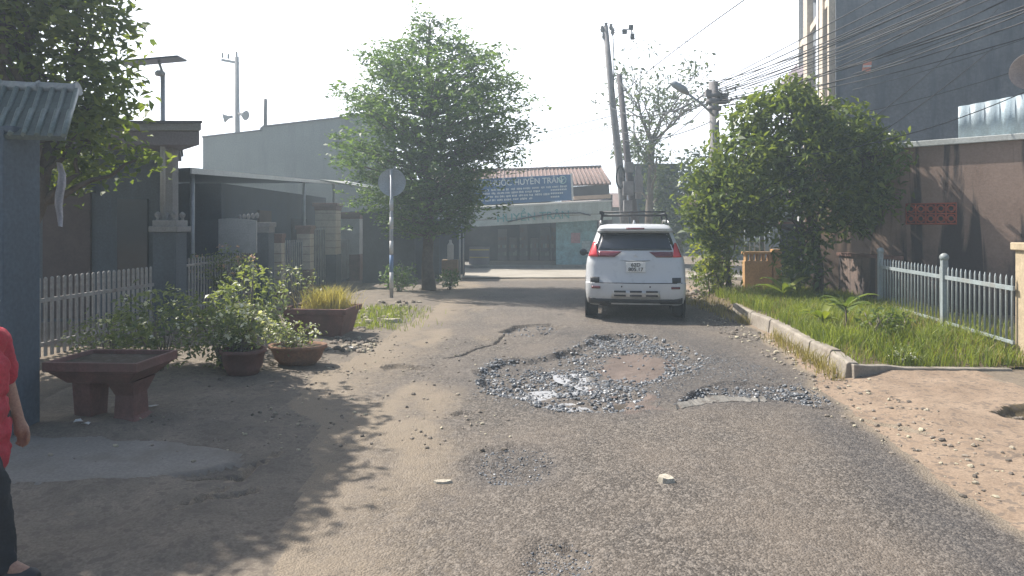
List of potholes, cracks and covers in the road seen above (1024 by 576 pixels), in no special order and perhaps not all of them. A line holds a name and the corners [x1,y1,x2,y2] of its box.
pothole [989,404,1024,420]
pothole [458,441,569,489]
crack [441,334,506,359]
pothole [472,333,716,413]
pothole [380,363,434,373]
pothole [641,347,833,410]
pothole [516,539,604,576]
